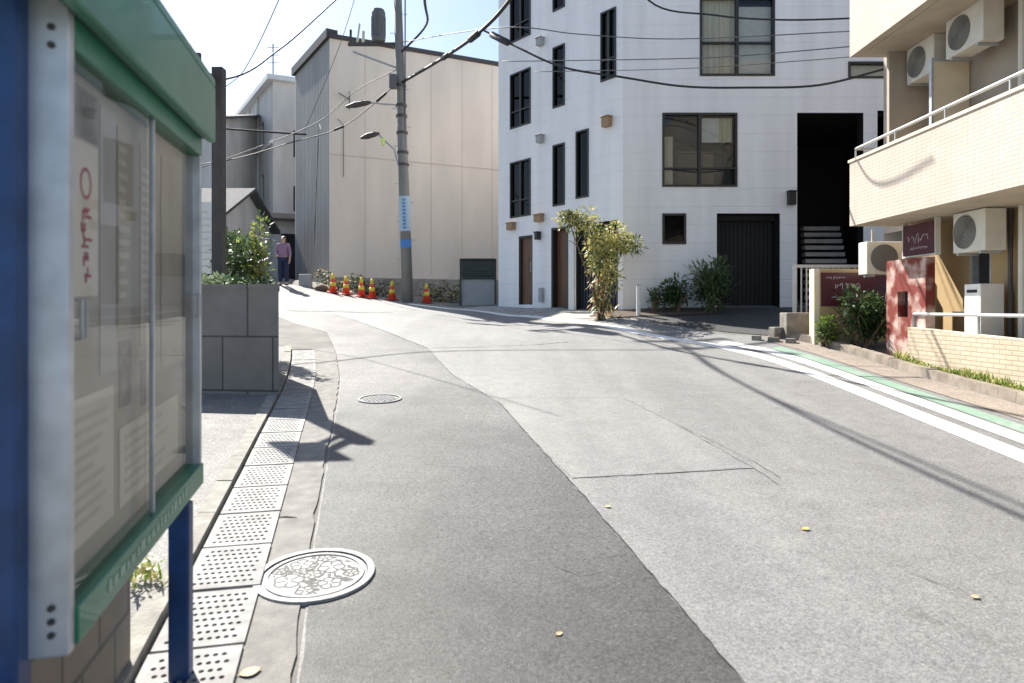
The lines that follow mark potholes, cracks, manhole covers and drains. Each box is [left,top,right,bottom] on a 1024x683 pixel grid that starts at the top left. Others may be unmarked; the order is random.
manhole cover [358,394,402,404]
manhole cover [252,548,375,607]
